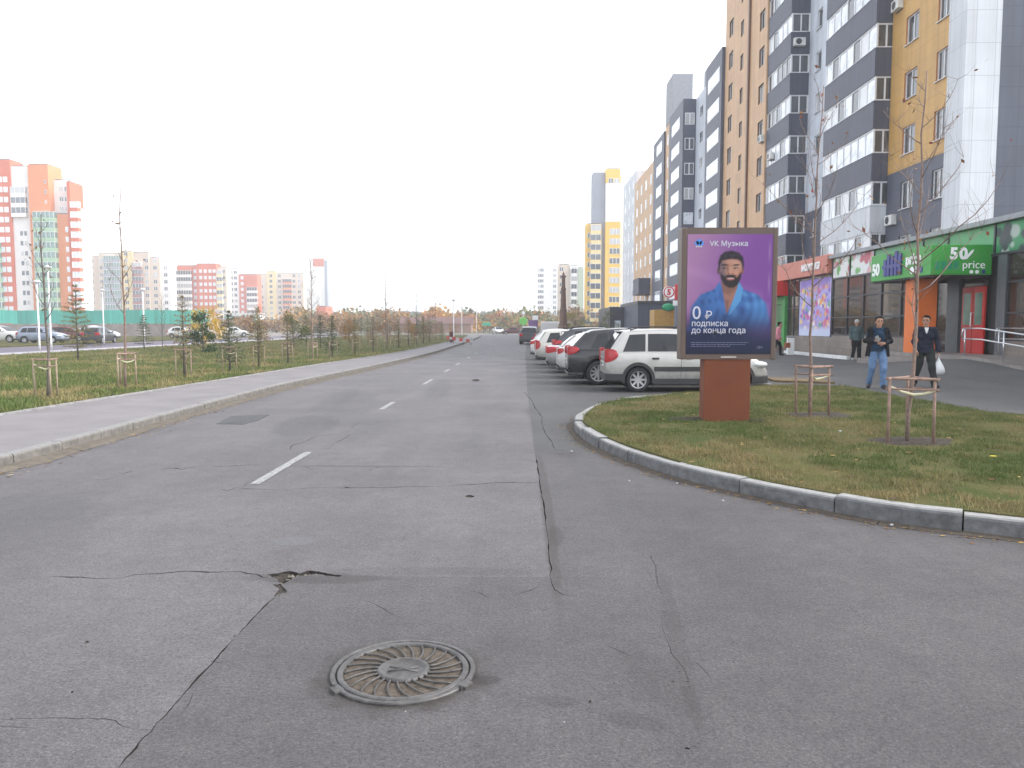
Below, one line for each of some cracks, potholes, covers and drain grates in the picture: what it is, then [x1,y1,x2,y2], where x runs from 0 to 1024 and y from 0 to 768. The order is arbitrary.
crack [650,555,711,687]
crack [0,595,280,768]
crack [61,571,266,579]
pothole [268,570,342,584]
manhole cover [329,640,476,707]
